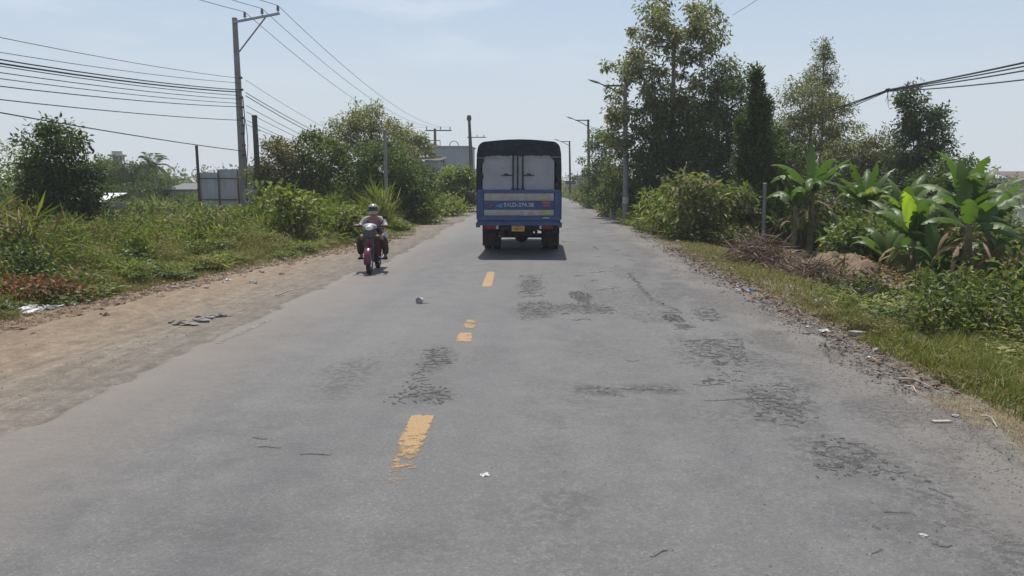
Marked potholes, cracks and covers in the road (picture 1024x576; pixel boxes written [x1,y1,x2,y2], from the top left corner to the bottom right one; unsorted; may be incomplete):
crack [517,247,953,548]
crack [383,347,458,404]
